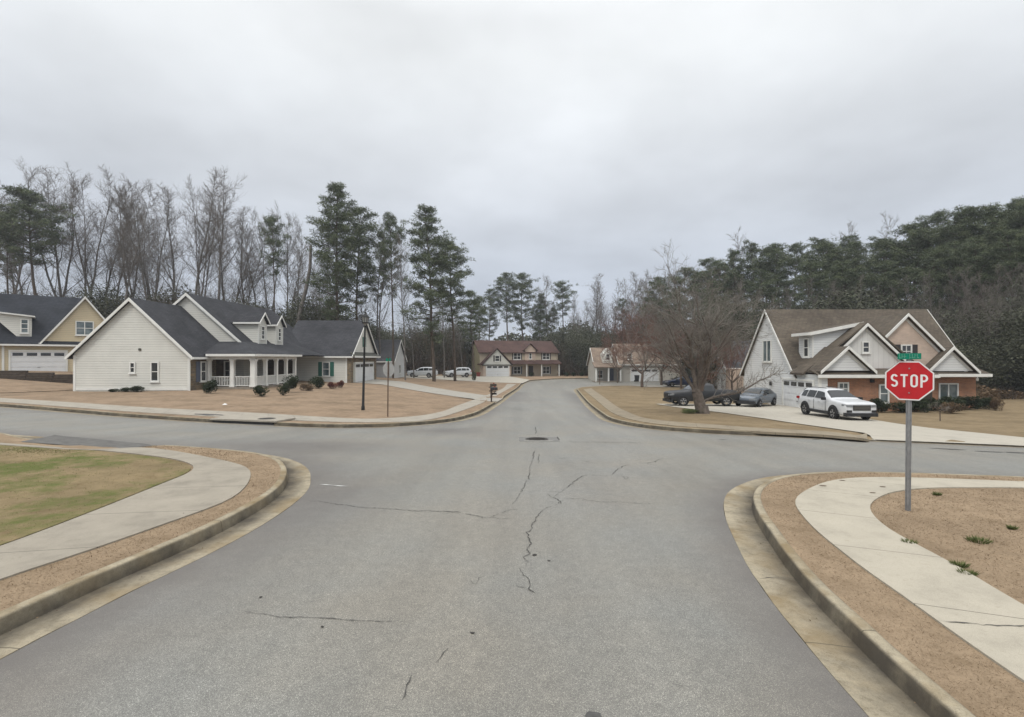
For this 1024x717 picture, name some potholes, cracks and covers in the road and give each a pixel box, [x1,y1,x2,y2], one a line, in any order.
crack [328,451,540,518]
crack [519,475,646,593]
